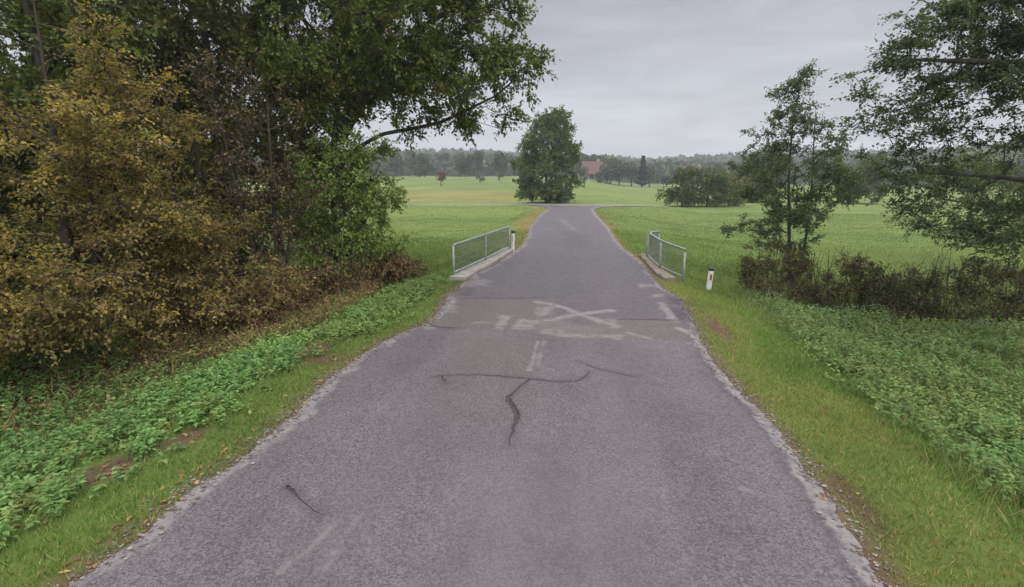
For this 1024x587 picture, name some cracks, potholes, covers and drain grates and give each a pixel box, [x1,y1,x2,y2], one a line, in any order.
crack [435,364,638,446]
crack [285,485,323,515]
